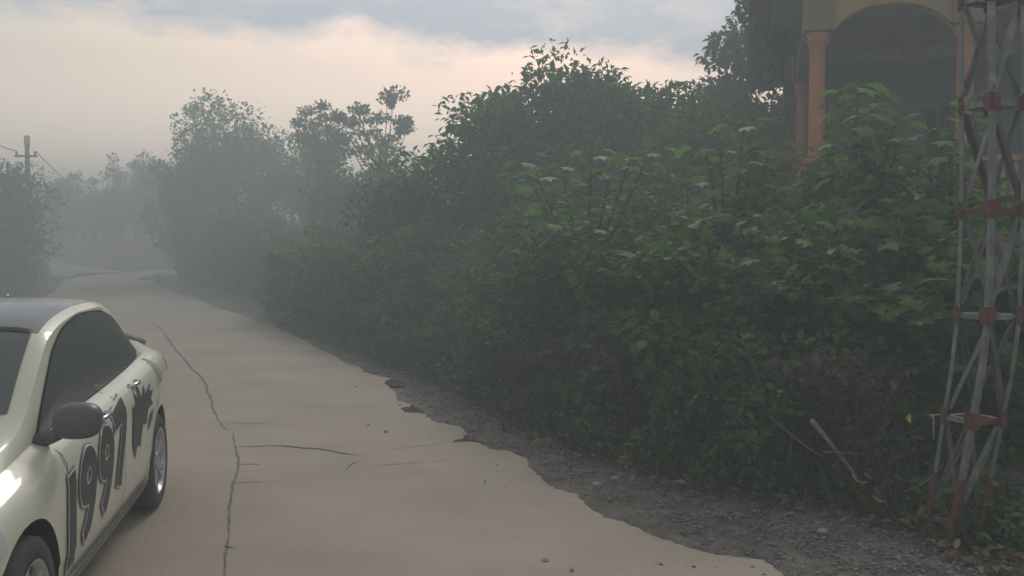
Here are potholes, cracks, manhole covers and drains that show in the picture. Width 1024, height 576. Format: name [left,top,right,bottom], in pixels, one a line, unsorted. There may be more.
crack [261,443,447,483]
crack [141,319,266,576]
